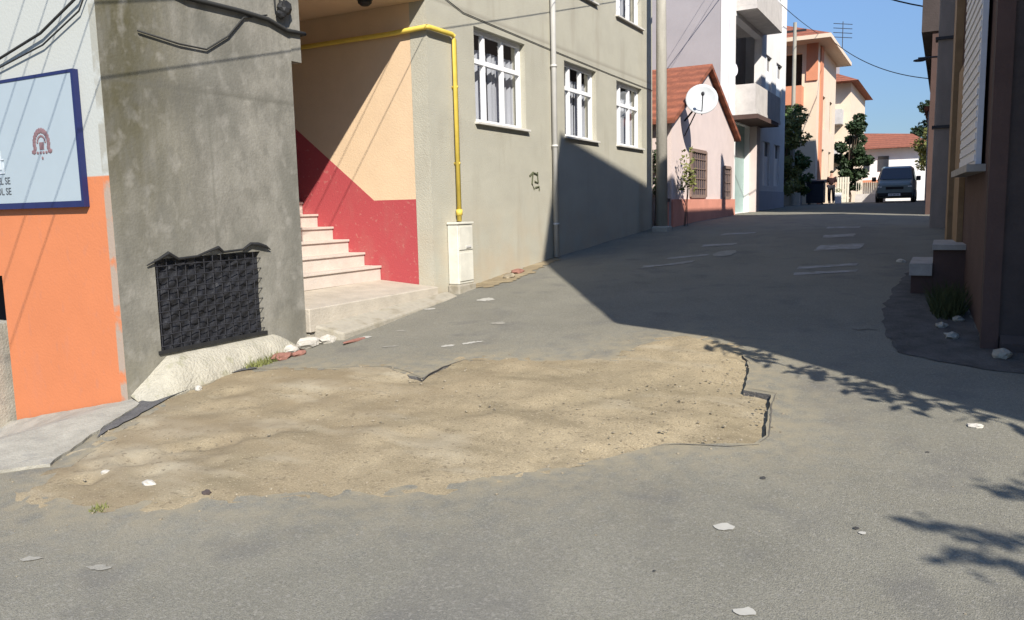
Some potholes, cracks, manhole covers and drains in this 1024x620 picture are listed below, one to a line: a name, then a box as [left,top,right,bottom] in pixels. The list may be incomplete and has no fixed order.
pothole [15,336,769,513]
